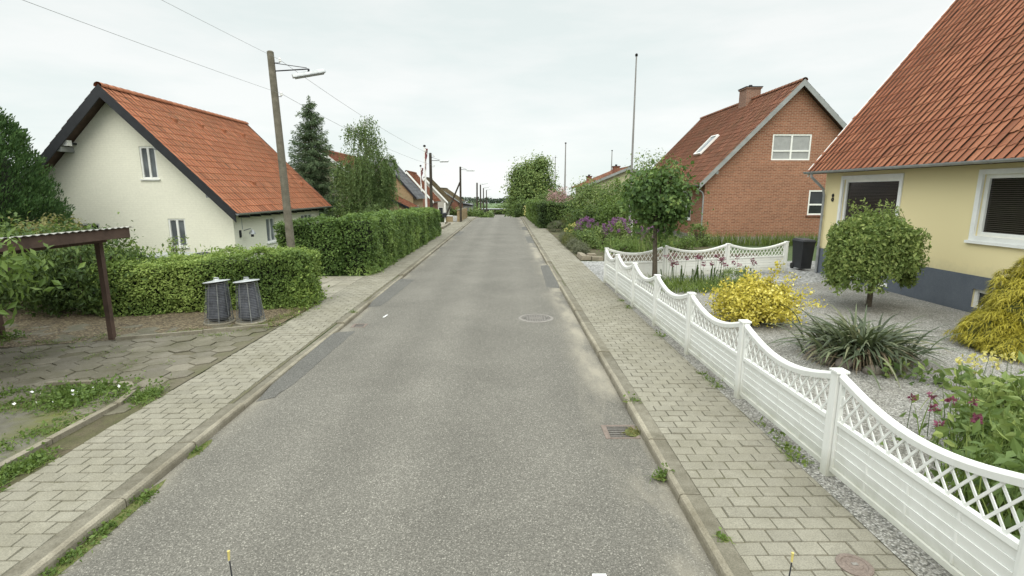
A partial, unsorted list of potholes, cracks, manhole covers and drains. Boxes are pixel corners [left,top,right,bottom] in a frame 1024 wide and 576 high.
drain grate [601,425,641,439]
manhole cover [518,314,554,323]
utility cover [835,553,875,576]
